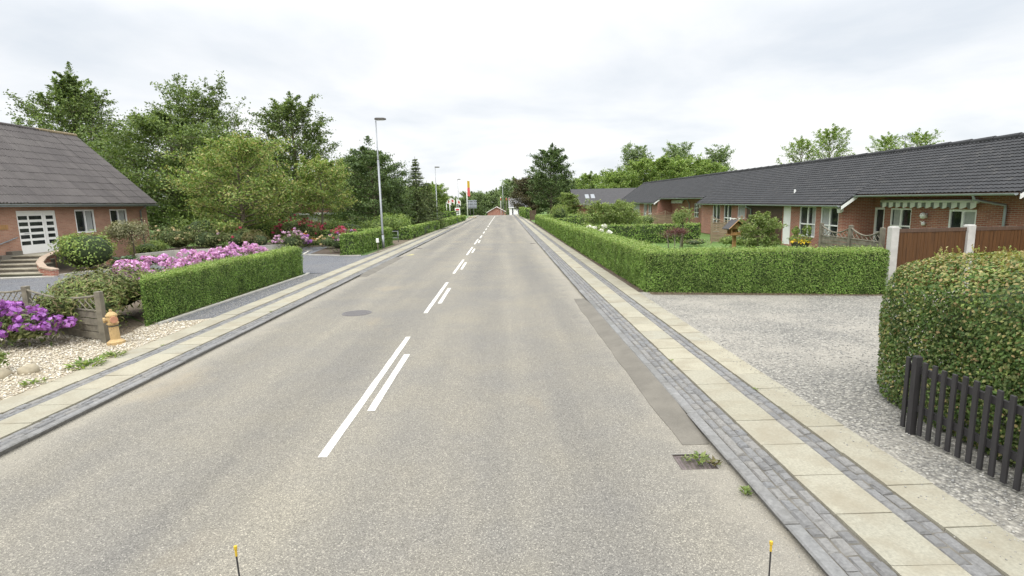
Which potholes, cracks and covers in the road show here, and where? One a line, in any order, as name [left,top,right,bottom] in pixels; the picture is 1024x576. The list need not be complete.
drain grate [671,453,719,470]
